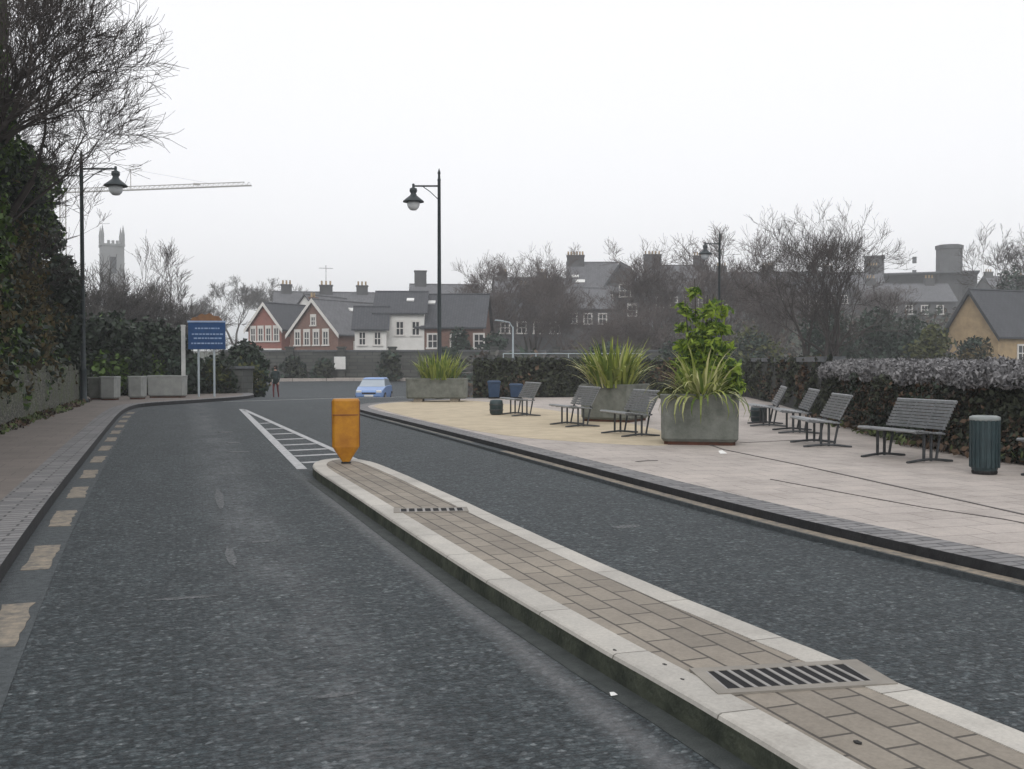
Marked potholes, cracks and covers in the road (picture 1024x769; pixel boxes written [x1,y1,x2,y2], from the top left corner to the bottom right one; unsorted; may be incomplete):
drain grate [689,659,898,695]
